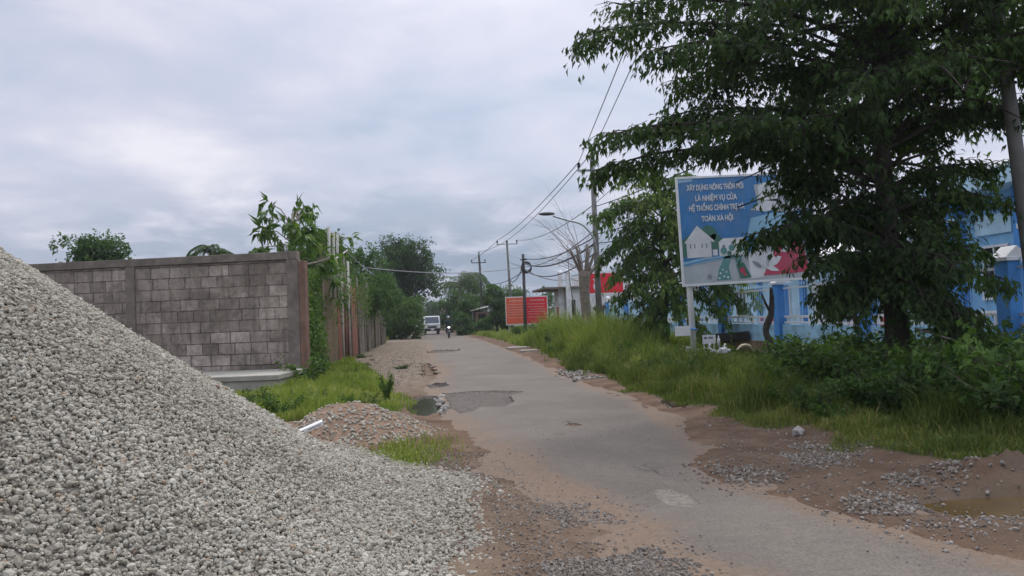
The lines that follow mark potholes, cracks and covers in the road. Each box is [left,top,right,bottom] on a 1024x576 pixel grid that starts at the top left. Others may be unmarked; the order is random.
pothole [408,392,451,416]
pothole [419,363,441,376]
